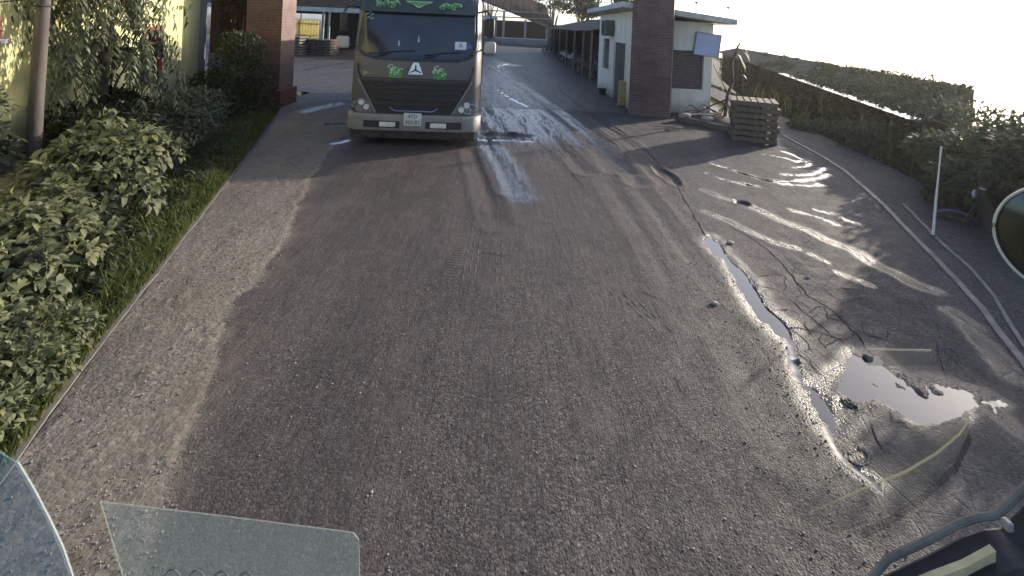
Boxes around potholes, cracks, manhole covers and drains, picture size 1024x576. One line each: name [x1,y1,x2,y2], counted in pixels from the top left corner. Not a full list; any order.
pothole [848,448,870,467]
pothole [841,396,858,408]
crack [645,148,966,383]
